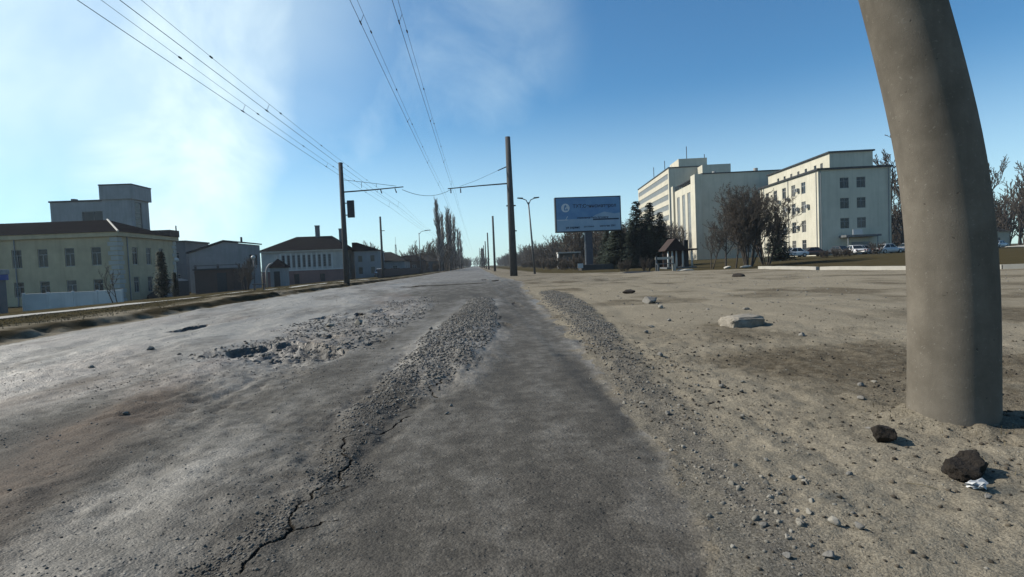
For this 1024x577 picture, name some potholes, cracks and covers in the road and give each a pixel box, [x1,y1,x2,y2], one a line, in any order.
pothole [207,340,365,369]
crack [217,377,456,577]
pothole [334,310,375,320]
pothole [347,337,404,349]
pothole [296,314,356,322]
pothole [303,331,357,342]
